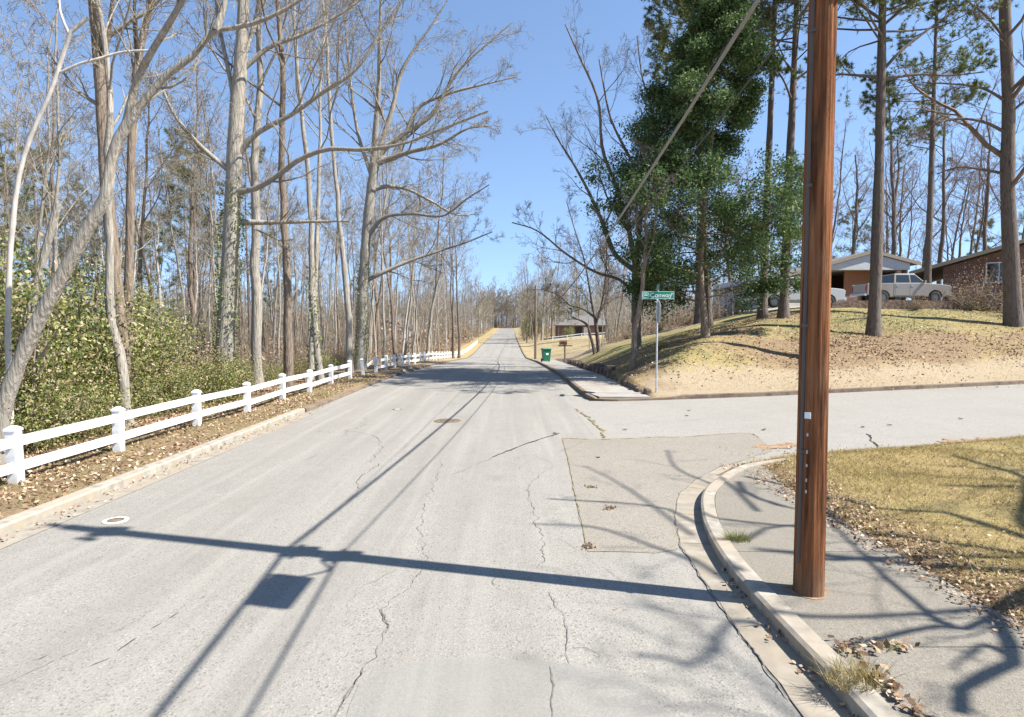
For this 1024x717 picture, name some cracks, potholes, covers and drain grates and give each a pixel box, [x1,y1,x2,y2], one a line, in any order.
utility cover [101,516,129,524]
crack [334,433,685,717]
